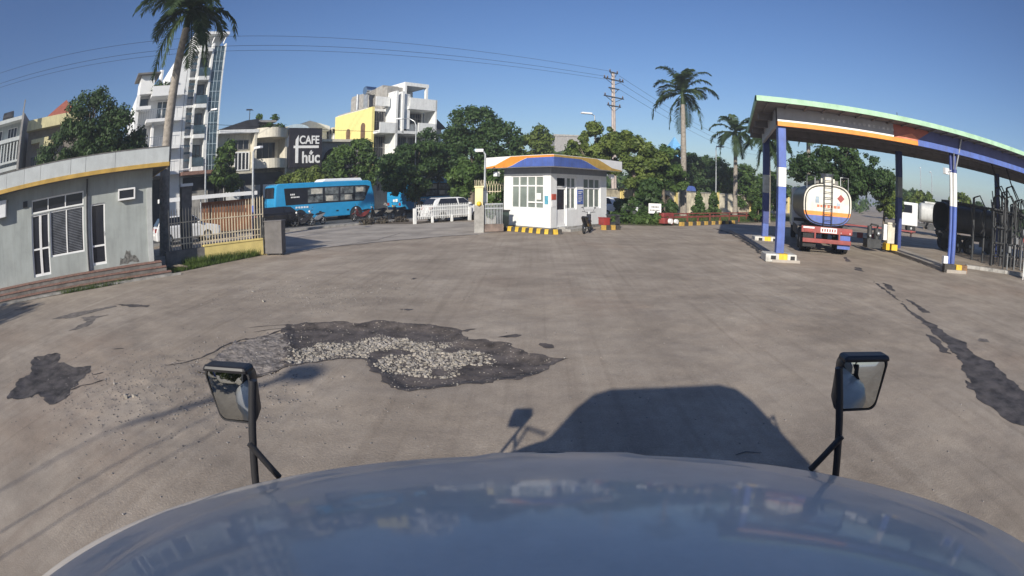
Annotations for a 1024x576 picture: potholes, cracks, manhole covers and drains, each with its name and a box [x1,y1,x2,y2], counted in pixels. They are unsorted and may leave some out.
pothole [280,320,567,392]
crack [169,324,294,375]
